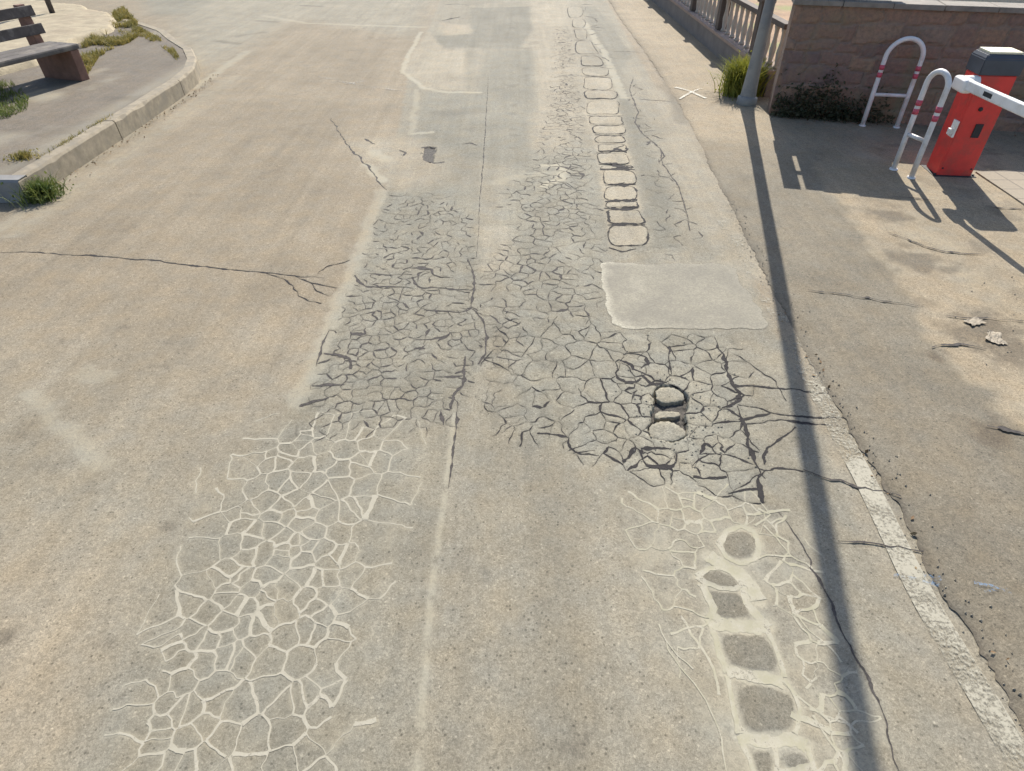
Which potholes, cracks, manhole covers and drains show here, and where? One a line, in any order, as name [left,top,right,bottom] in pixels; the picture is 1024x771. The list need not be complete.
crack [891,233,979,254]
crack [2,251,349,304]
crack [104,4,703,771]
crack [808,289,919,306]
crack [482,309,923,771]
pothole [422,148,437,163]
crack [987,425,1024,434]
pothole [648,396,688,432]
